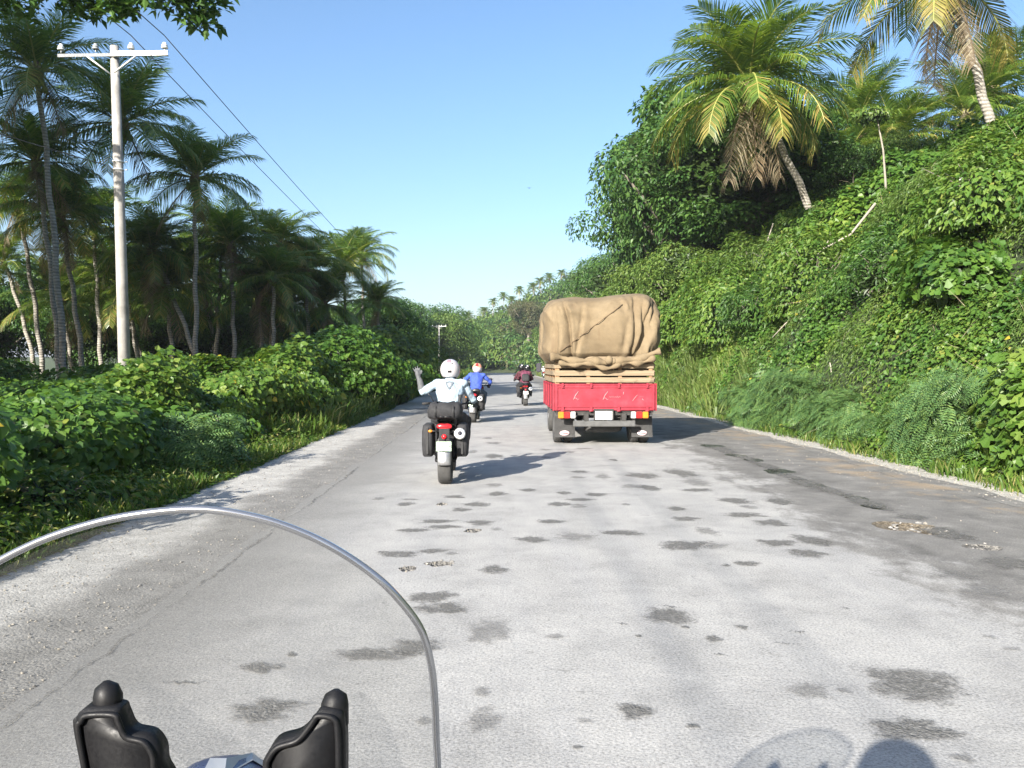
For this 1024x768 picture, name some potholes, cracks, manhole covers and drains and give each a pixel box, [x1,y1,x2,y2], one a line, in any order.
pothole [871,521,949,535]
pothole [961,543,1004,551]
pothole [424,559,455,567]
